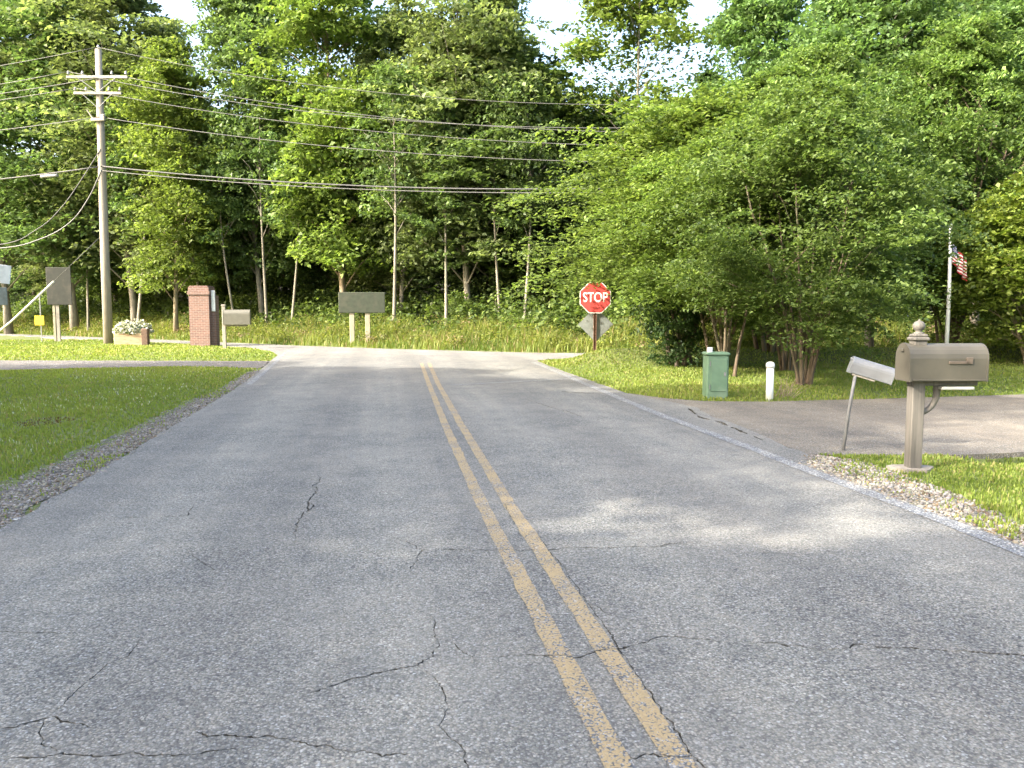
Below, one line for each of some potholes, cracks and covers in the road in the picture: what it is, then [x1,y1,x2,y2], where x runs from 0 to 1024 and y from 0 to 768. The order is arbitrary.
crack [487,636,1024,658]
crack [2,640,406,759]
crack [313,617,474,767]
